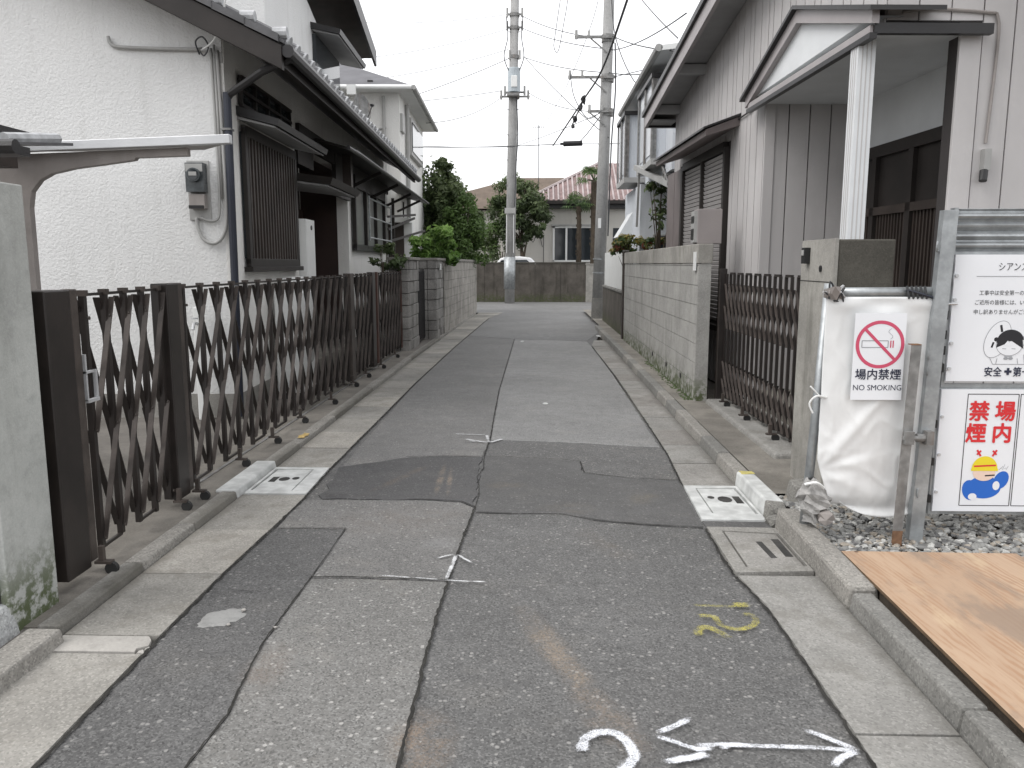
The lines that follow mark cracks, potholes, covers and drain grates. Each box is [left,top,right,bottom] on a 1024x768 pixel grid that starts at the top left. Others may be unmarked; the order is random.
crack [32,318,682,768]
